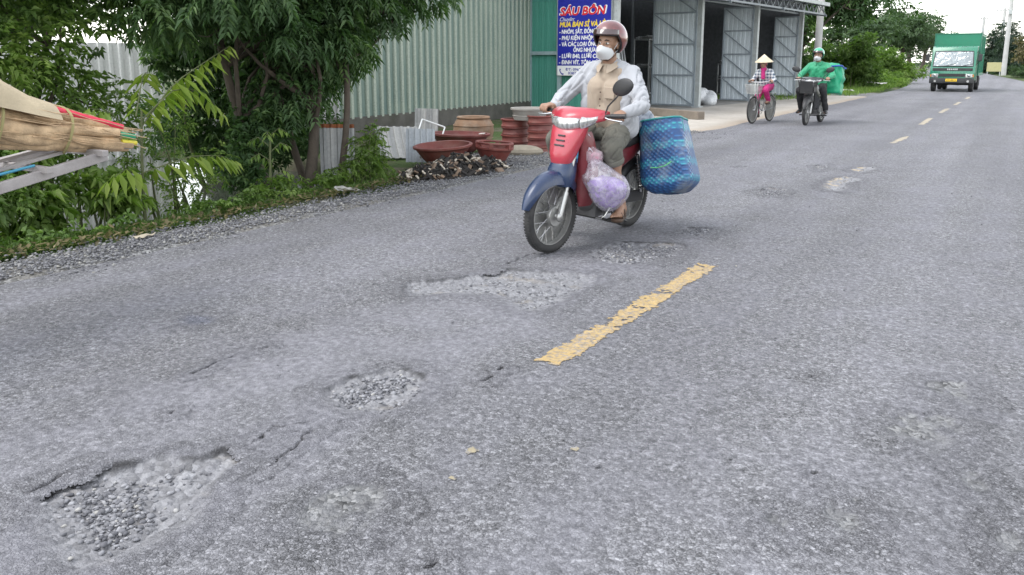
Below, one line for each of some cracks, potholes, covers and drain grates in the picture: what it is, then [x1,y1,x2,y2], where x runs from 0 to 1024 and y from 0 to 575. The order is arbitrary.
crack [477,251,547,276]
pothole [384,265,617,319]
crack [211,410,349,492]
crack [171,341,284,383]
pothole [571,239,704,271]
pothole [293,359,457,432]
pothole [743,186,799,198]
pothole [0,435,276,575]
